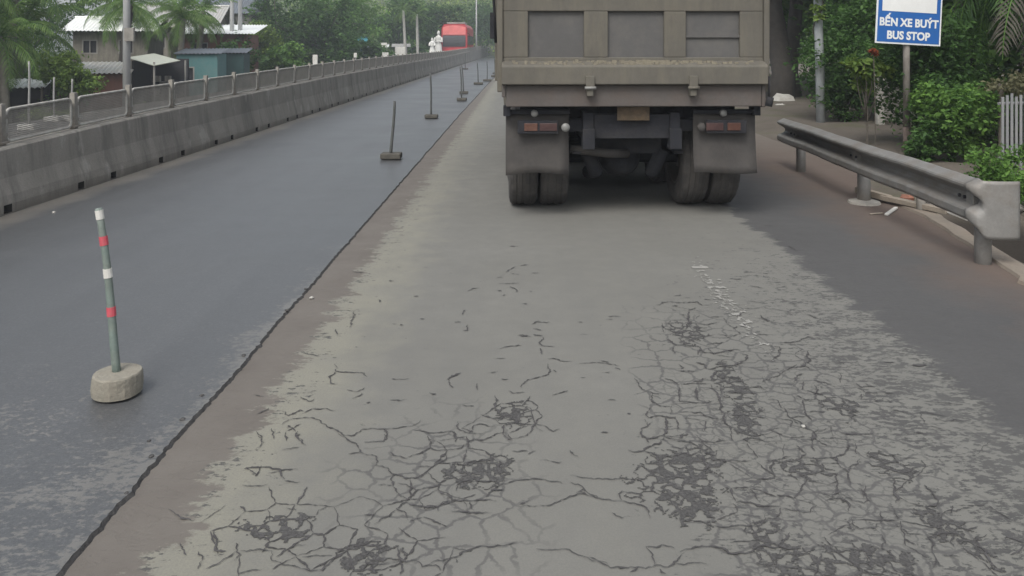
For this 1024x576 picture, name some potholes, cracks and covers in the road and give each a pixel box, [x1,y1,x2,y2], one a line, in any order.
crack [180,273,1024,576]
